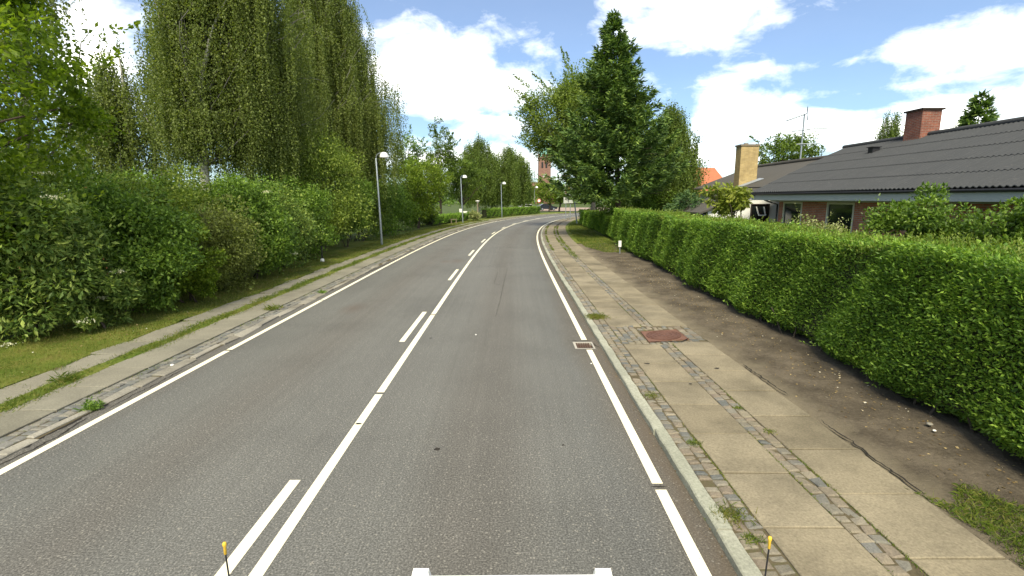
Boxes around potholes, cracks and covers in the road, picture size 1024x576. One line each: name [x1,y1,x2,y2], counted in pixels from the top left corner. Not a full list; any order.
manhole cover [641,329,689,343]
crack [823,422,924,494]
